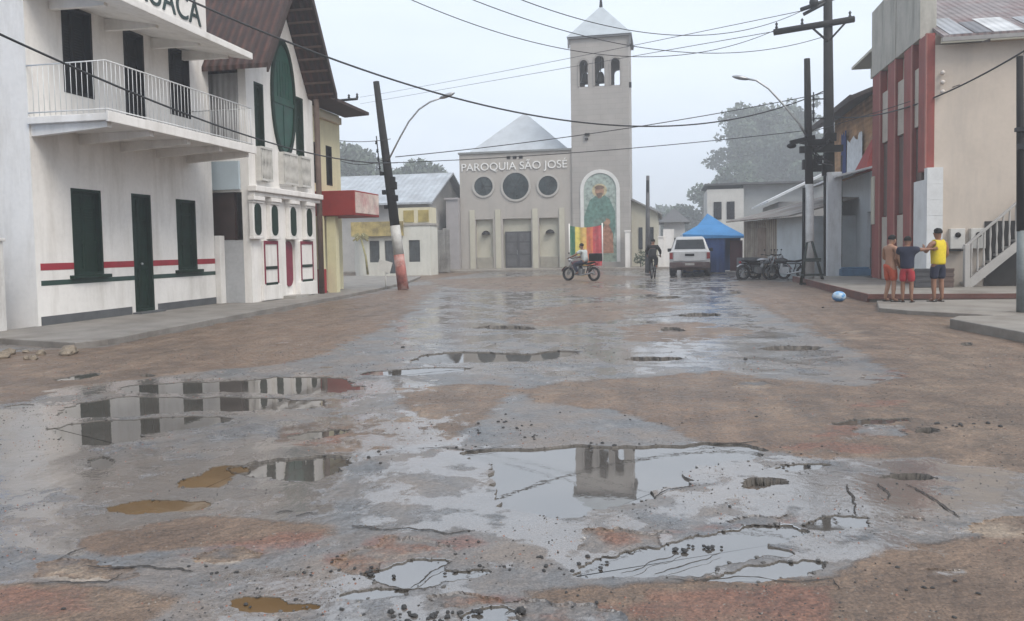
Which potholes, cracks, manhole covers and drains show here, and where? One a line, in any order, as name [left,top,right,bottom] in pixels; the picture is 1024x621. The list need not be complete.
crack [36,547,193,584]
pothole [177,465,251,488]
pothole [53,372,103,381]
pothole [572,522,810,580]
pothole [220,594,321,613]
pothole [362,557,492,591]
pothole [287,429,351,440]
pothole [226,454,353,482]
pothole [800,513,870,532]
pothole [409,350,581,363]
pothole [741,477,789,490]
